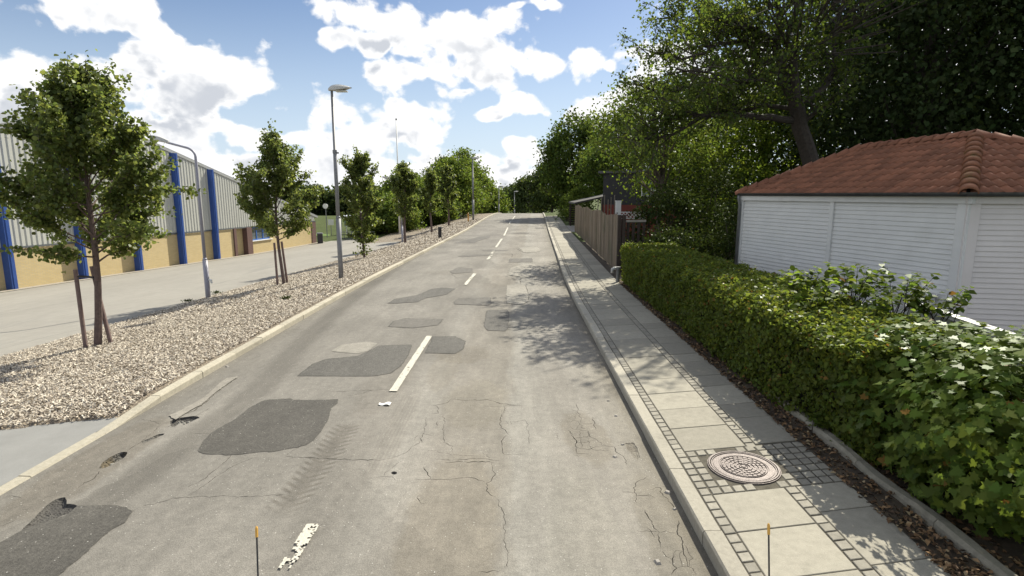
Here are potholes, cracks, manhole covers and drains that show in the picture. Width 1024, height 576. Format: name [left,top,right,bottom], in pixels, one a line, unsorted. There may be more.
pothole [99,452,127,469]
crack [142,456,284,507]
pothole [170,416,199,427]
manhole cover [707,451,781,485]
pothole [22,497,77,530]
crack [633,479,694,573]
crack [568,405,626,463]
crack [287,399,530,573]
